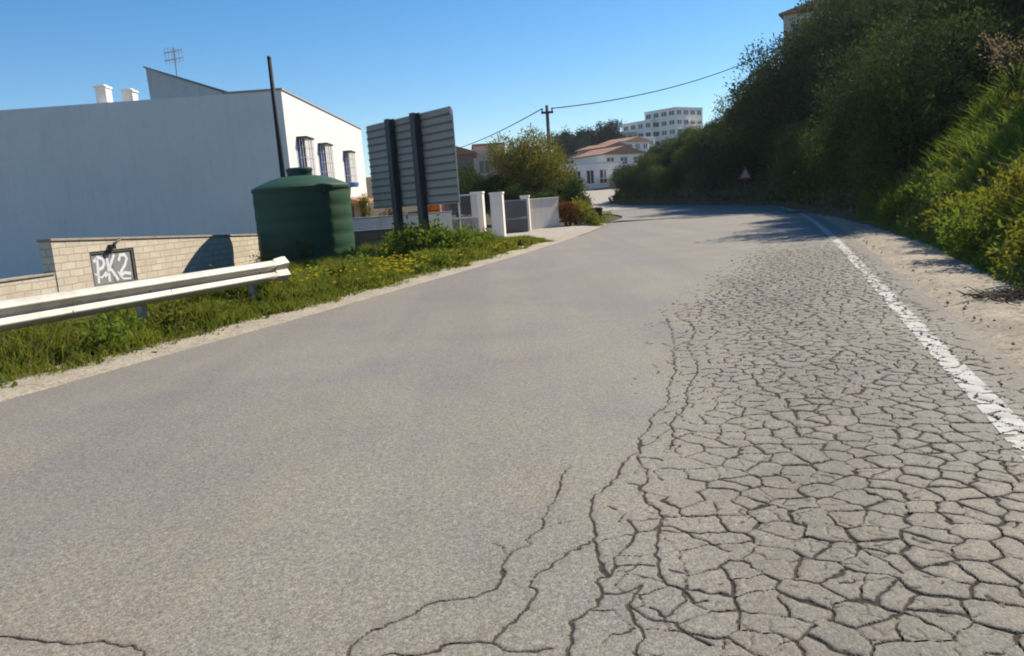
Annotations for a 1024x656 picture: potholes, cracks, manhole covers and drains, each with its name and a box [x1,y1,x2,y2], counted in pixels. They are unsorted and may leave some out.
crack [0,635,146,656]
crack [346,234,1024,656]
